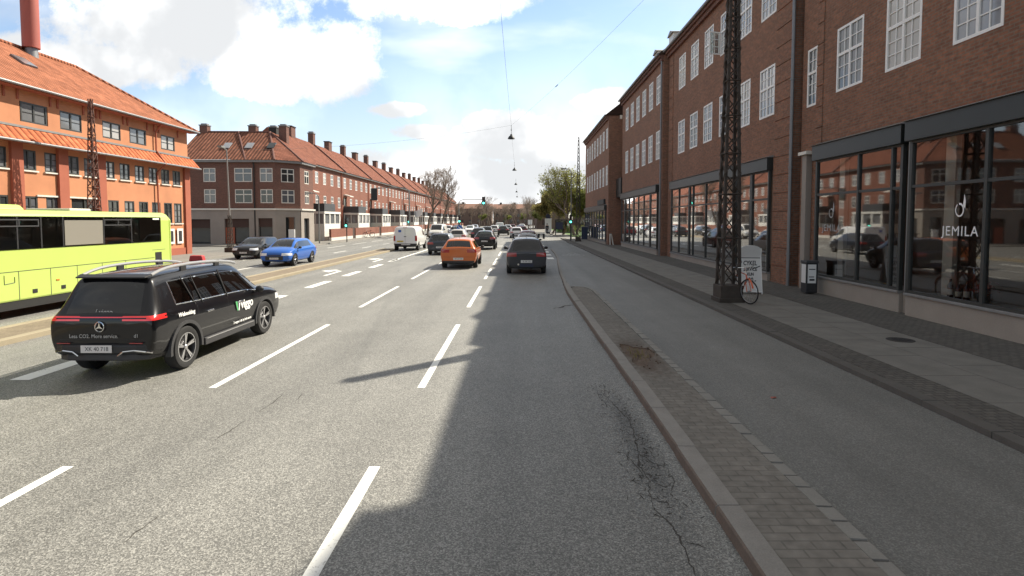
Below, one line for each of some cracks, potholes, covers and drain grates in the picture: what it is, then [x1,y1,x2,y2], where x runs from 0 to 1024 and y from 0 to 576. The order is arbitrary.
pothole [619,344,661,369]
